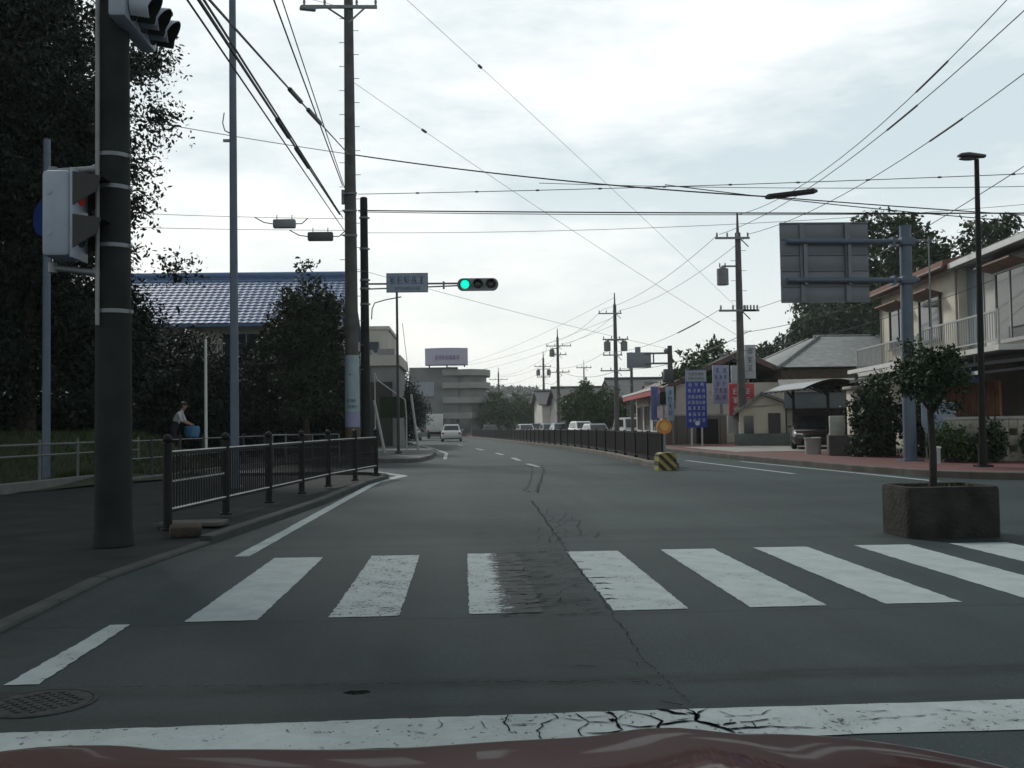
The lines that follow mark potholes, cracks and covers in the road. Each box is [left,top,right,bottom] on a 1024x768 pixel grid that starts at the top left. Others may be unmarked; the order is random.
manhole cover [0,688,99,719]
crack [286,701,813,739]
crack [481,513,606,616]
